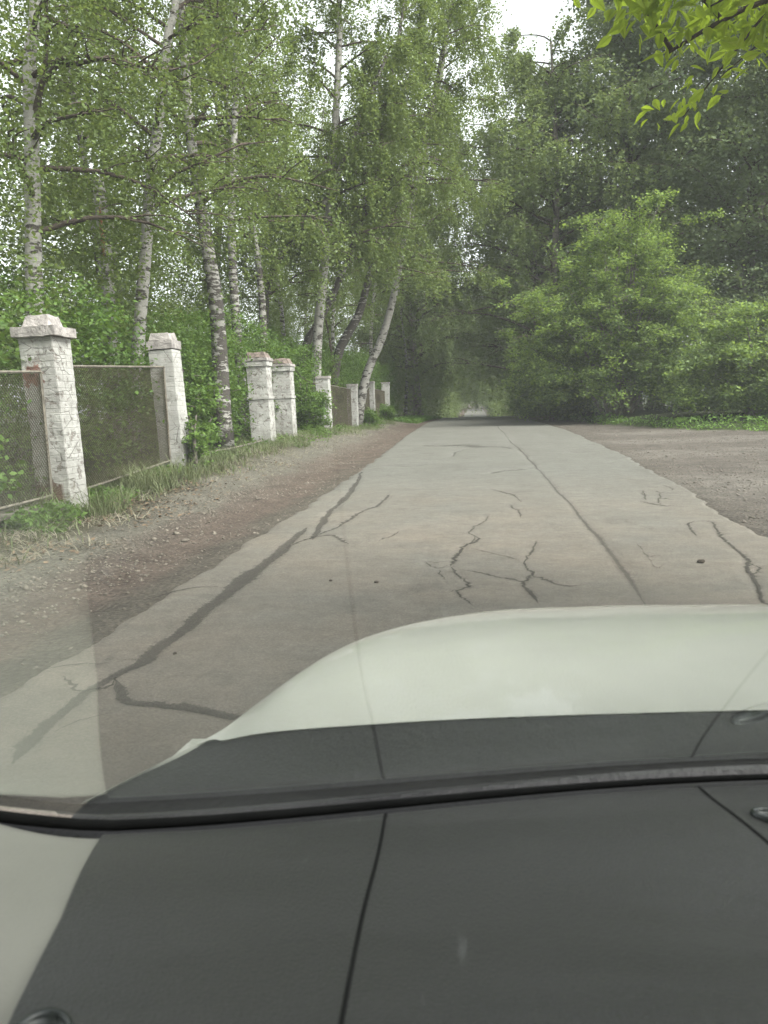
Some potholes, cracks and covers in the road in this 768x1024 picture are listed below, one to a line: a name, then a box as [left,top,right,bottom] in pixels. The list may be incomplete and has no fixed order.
crack [379,518,576,605]
crack [641,485,768,605]
